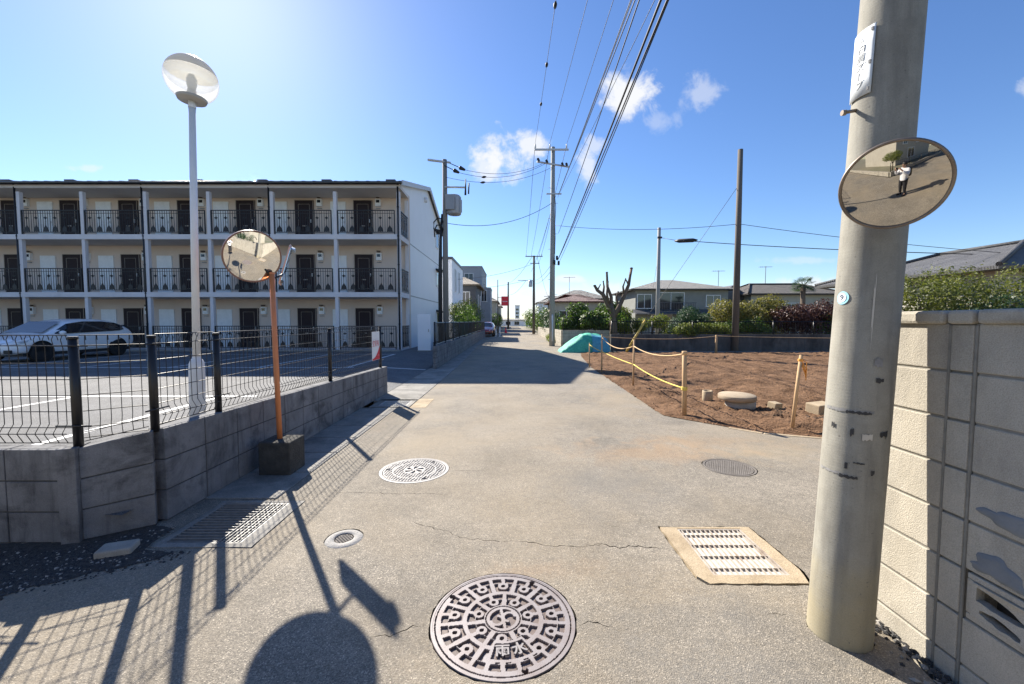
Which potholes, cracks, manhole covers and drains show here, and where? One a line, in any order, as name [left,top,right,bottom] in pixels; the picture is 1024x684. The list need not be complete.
crack [414,522,669,549]
manhole cover [430,574,576,683]
drain grate [660,527,809,586]
utility cover [324,530,364,549]
drain grate [150,500,305,549]
manhole cover [379,458,449,484]
manhole cover [702,459,757,477]
